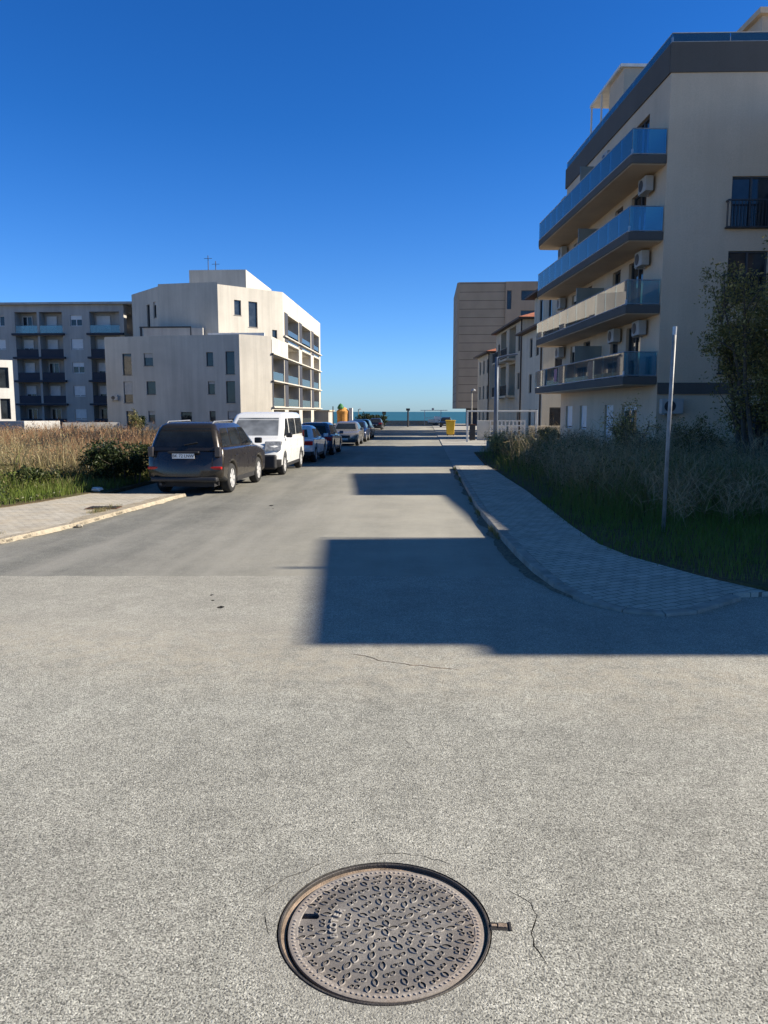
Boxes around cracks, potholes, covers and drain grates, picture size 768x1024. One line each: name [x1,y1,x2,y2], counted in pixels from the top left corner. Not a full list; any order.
crack [354,654,457,670]
crack [255,860,330,935]
crack [507,890,549,967]
manhole cover [276,862,512,1006]
